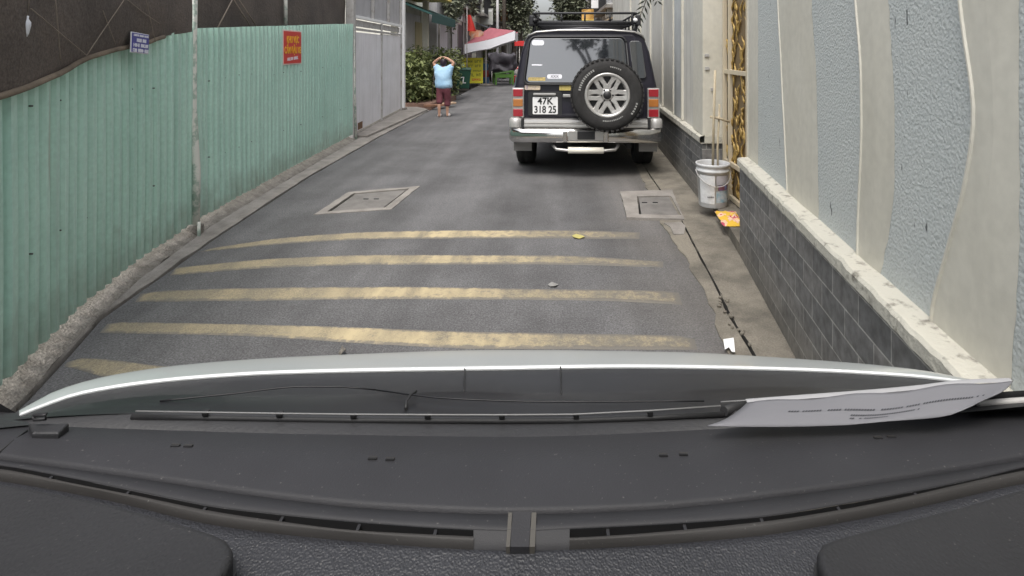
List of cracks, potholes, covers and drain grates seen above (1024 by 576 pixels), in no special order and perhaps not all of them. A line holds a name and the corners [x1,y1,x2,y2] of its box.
crack [682,221,756,356]
manhole cover [620,190,684,222]
manhole cover [313,186,420,215]
